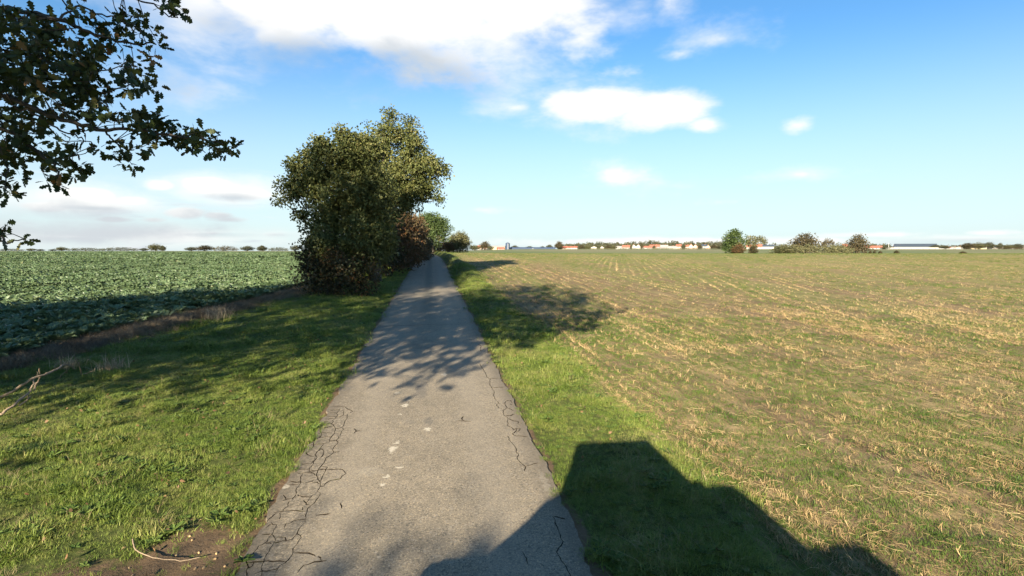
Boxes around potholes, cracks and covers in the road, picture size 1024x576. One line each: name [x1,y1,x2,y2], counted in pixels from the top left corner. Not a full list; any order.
crack [552,516,571,576]
crack [245,406,359,576]
crack [480,345,537,471]
